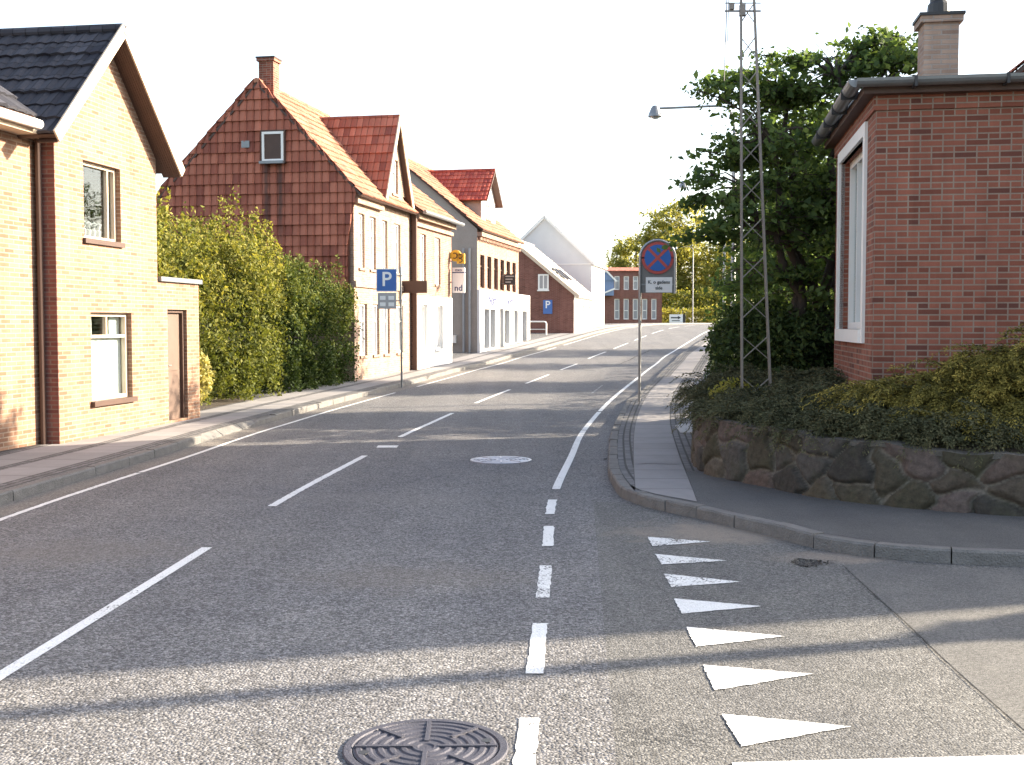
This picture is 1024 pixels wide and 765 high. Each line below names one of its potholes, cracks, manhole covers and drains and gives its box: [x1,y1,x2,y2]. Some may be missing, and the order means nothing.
manhole cover [342,719,509,765]
manhole cover [470,456,532,464]
pothole [790,558,826,568]
